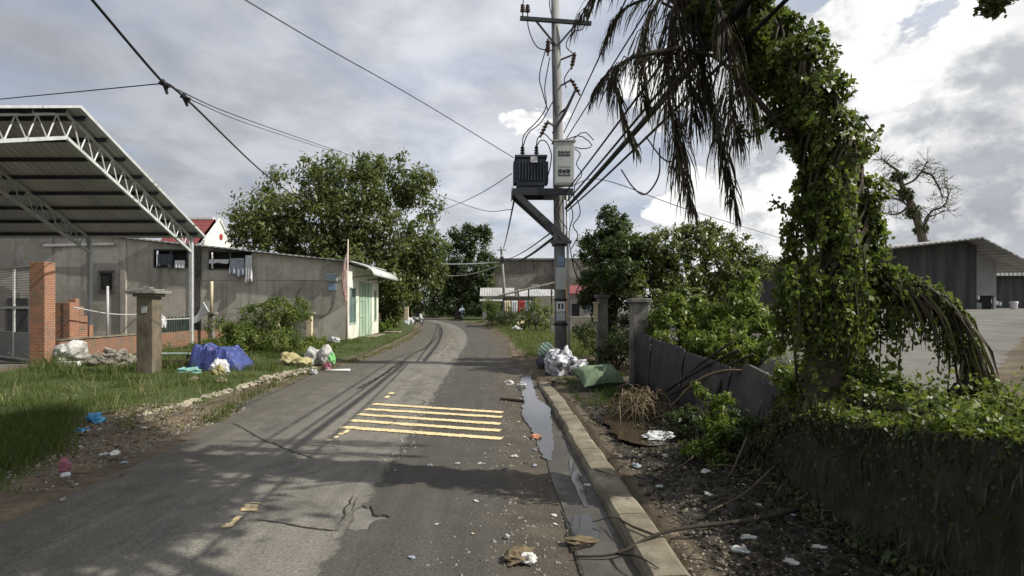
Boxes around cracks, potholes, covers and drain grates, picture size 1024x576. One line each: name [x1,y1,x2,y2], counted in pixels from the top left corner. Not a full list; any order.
crack [233,423,314,458]
crack [256,495,357,531]
pothole [346,505,390,531]
